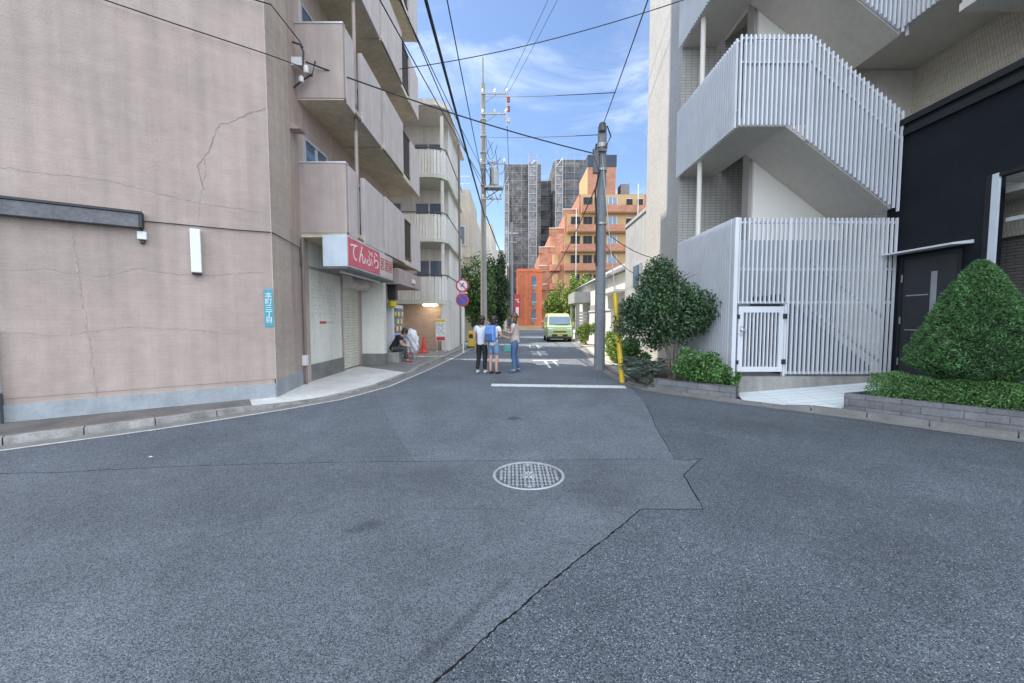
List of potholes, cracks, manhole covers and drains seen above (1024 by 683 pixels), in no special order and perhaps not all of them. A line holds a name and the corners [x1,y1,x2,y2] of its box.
manhole cover [493,462,565,490]
